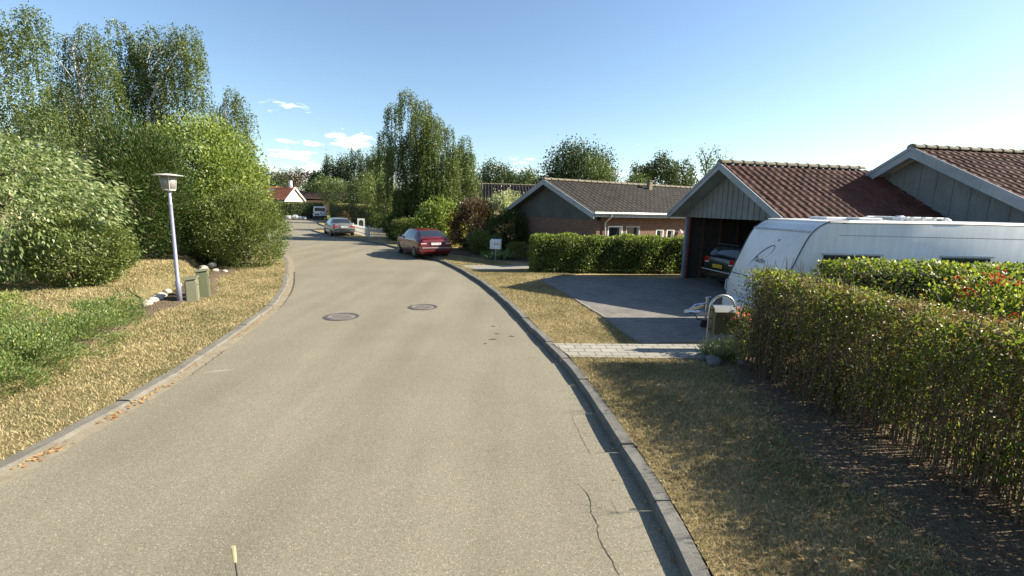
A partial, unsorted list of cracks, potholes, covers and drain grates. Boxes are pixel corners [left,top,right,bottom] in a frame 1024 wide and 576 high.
manhole cover [323,313,359,321]
crack [579,484,620,576]
